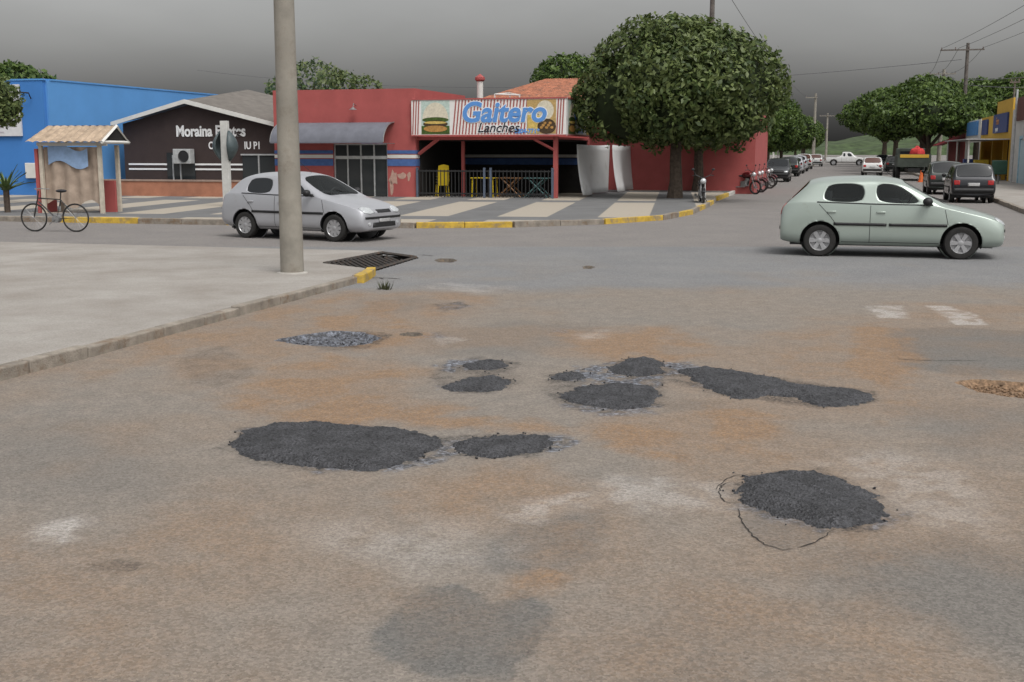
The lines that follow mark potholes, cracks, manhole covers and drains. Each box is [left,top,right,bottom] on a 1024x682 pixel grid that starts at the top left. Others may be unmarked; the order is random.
crack [716,474,830,550]
drain grate [323,251,418,271]
pothole [274,331,382,347]
